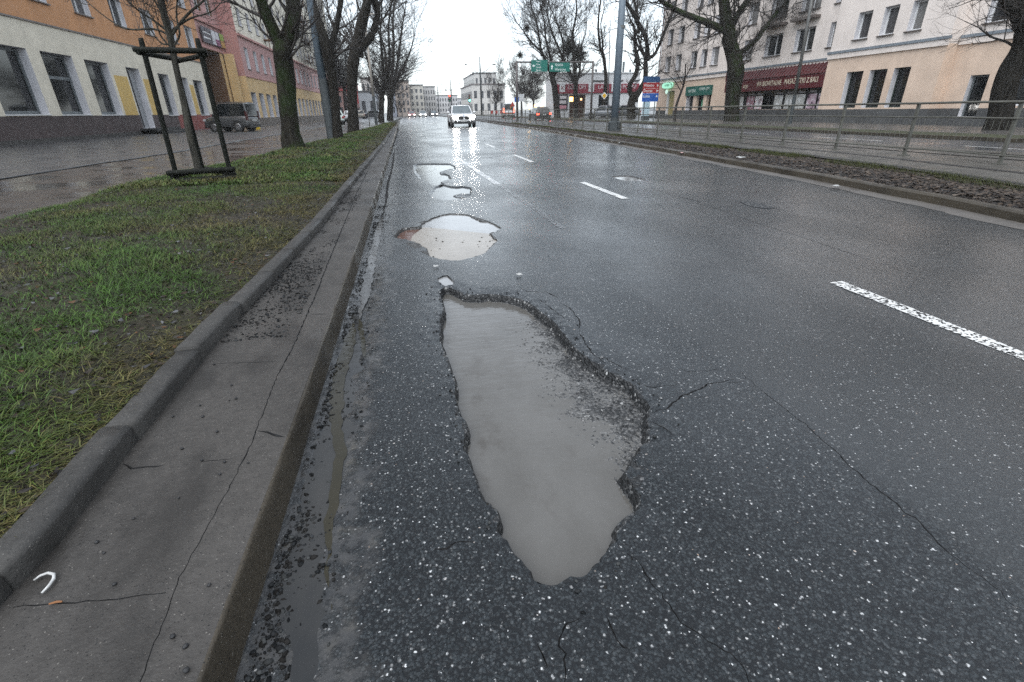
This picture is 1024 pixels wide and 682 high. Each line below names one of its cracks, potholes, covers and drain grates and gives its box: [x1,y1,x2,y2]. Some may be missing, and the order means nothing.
pothole [439,287,650,586]
crack [537,618,579,682]
pothole [394,213,501,261]
crack [607,618,628,649]
pothole [437,275,454,286]
pothole [428,184,472,200]
crack [642,368,738,434]
pothole [413,163,456,186]
crack [627,553,749,682]
